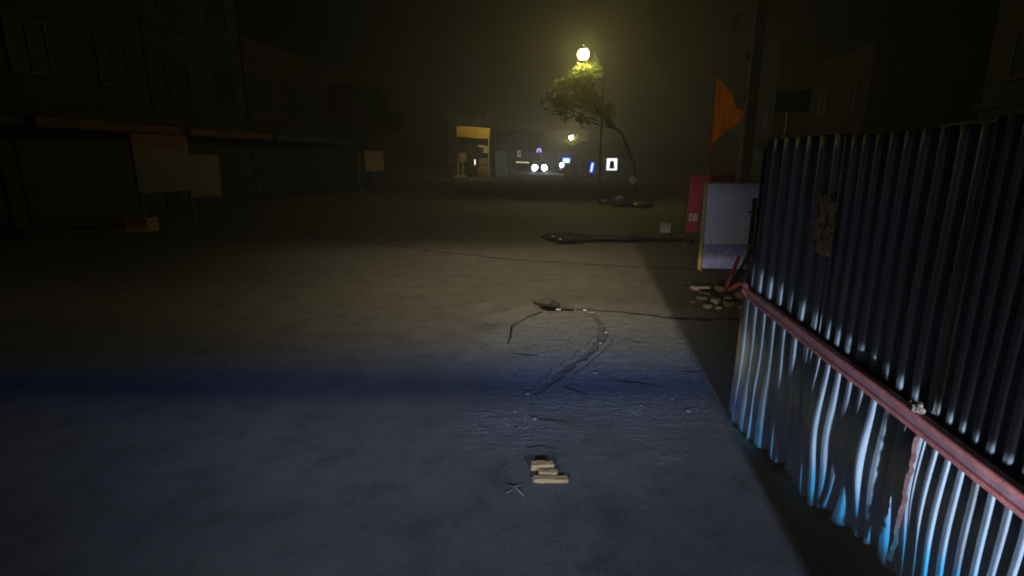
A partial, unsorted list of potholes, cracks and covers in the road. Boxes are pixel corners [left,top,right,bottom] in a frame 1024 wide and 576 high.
crack [508,308,740,395]
